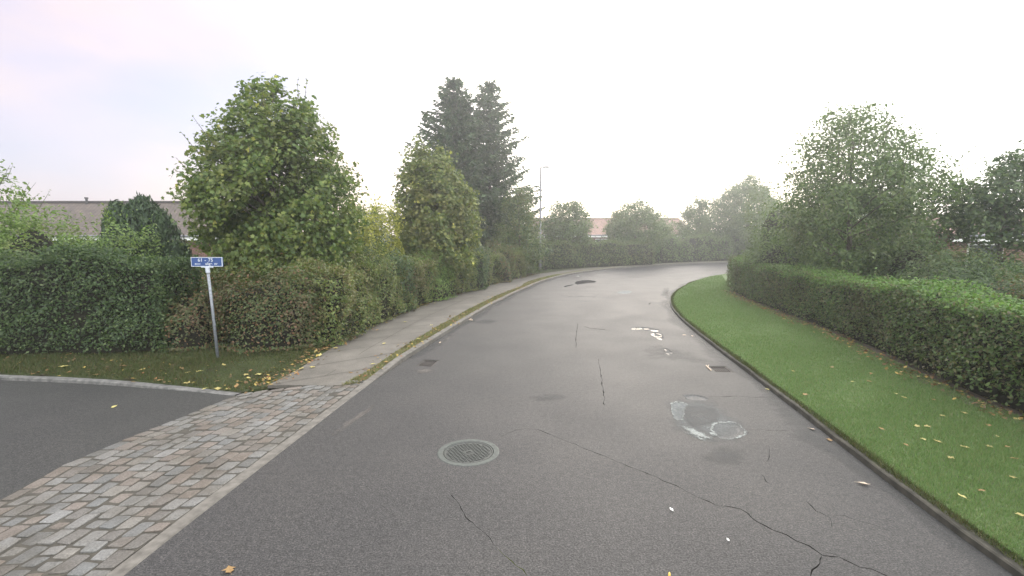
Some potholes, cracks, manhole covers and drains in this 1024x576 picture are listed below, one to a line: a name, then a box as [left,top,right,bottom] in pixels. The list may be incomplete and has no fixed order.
crack [726,505,888,576]
crack [451,495,527,575]
manhole cover [437,439,499,466]
crack [503,428,713,504]
